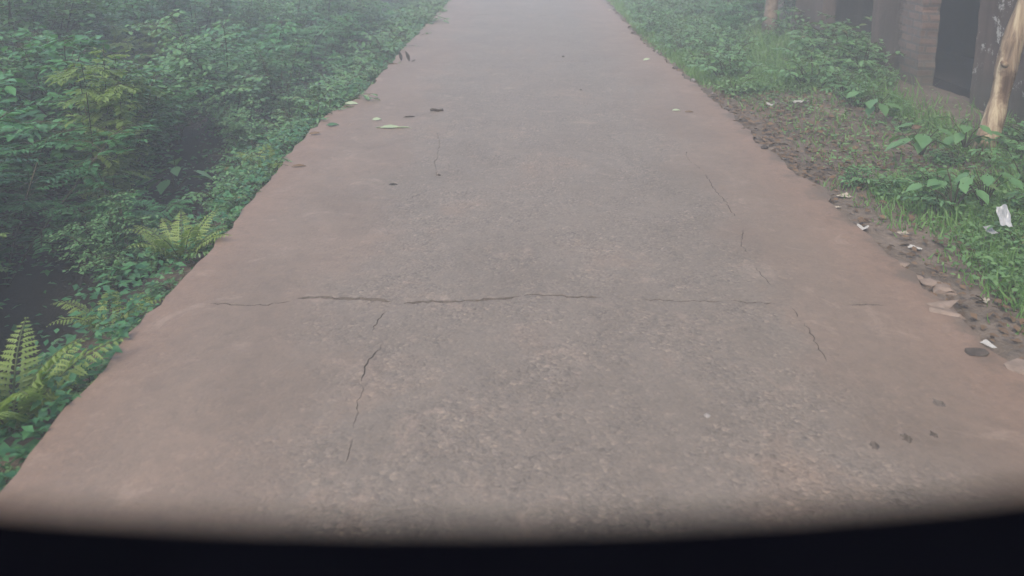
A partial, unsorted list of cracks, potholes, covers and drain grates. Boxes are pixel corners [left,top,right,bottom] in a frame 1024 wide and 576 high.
crack [213,294,878,467]
crack [686,152,827,361]
